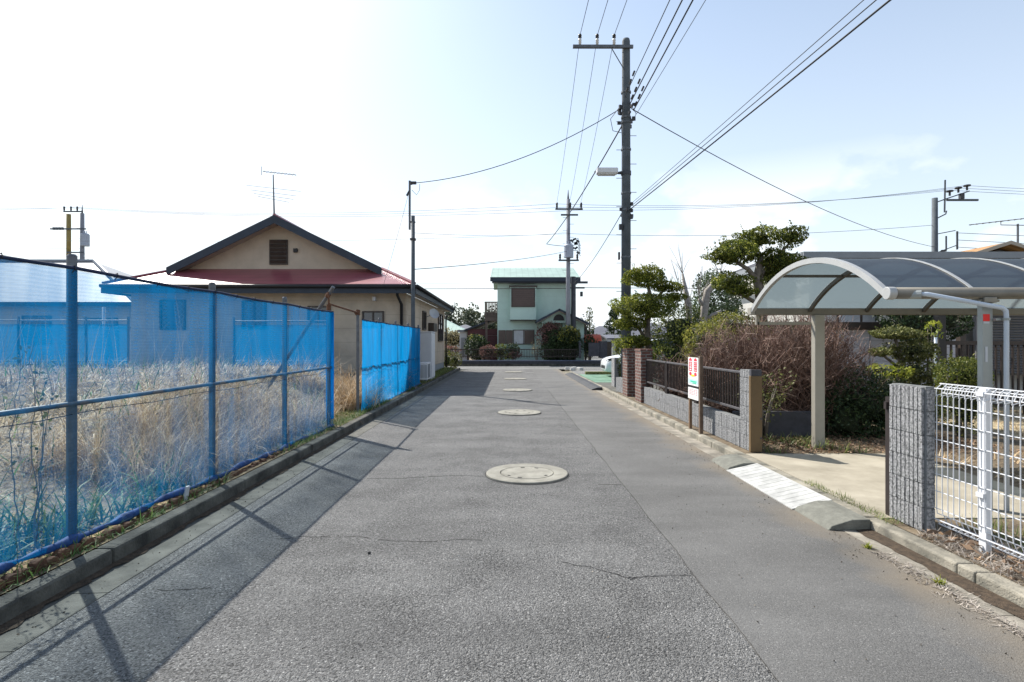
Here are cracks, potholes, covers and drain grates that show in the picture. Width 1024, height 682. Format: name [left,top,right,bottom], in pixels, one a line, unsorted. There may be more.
manhole cover [484,463,570,485]
crack [561,561,678,580]
